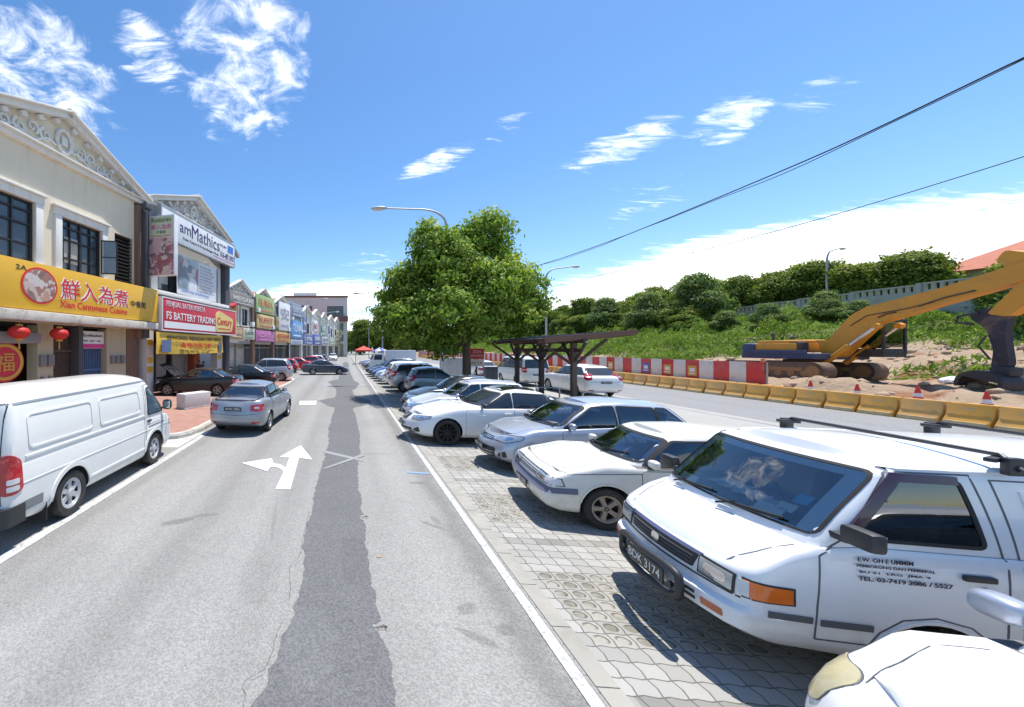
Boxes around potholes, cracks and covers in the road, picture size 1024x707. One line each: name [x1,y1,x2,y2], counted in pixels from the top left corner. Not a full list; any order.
crack [242,622,282,707]
